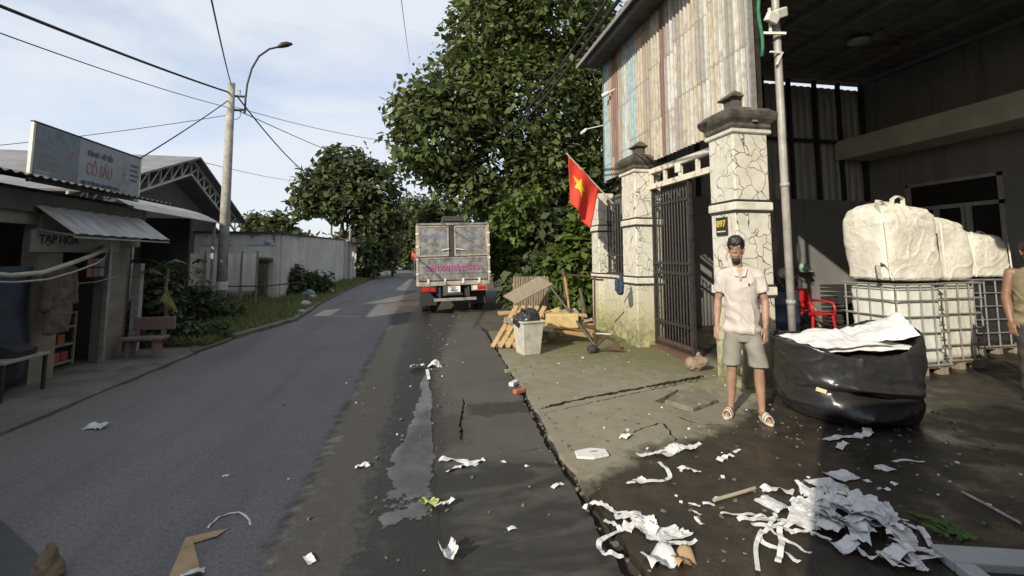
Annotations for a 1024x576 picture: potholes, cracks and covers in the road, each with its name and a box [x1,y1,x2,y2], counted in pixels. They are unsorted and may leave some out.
crack [441,317,722,576]
